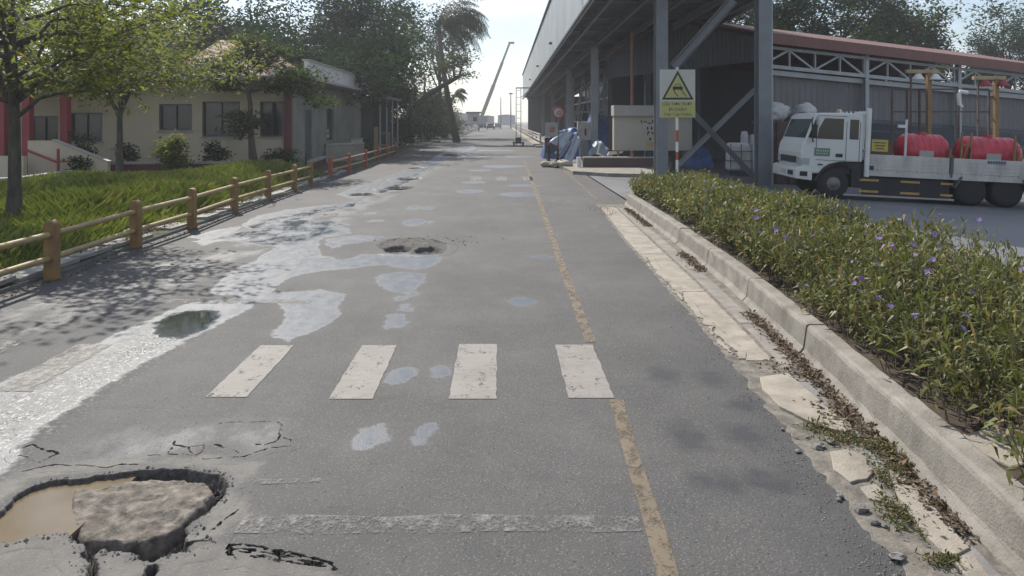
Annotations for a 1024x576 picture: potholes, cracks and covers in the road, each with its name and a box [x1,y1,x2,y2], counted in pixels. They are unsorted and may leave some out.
pothole [365,236,459,257]
pothole [0,462,247,576]
crack [4,417,303,479]
crack [184,502,354,576]
